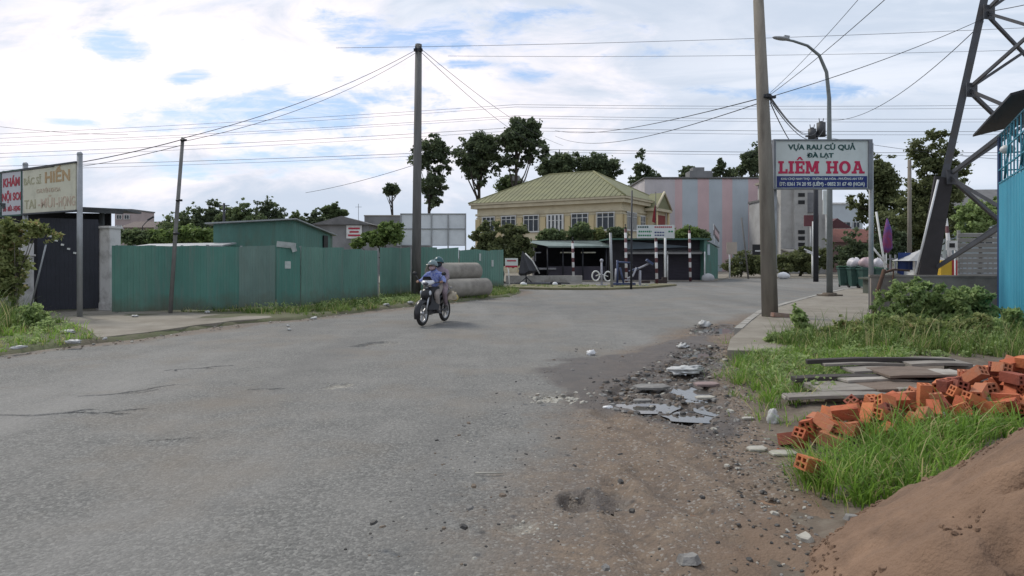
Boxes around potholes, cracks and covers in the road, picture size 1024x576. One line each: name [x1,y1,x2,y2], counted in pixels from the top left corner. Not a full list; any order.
pothole [681,324,736,337]
crack [0,364,298,448]
pothole [517,480,632,518]
pothole [591,344,749,435]
